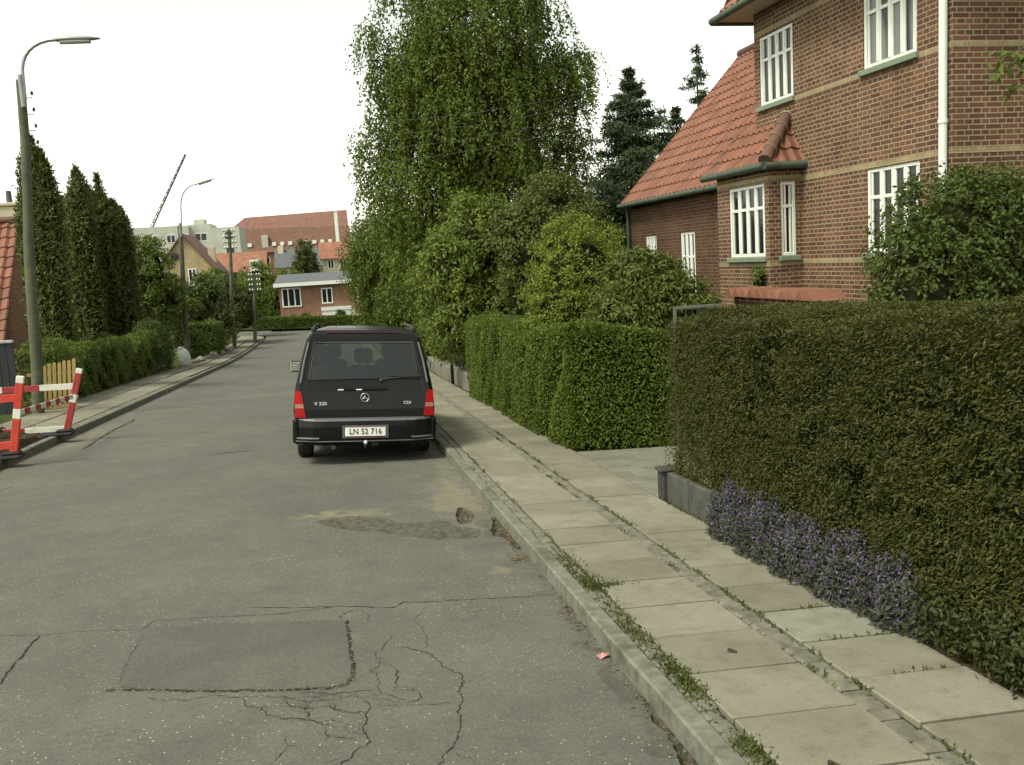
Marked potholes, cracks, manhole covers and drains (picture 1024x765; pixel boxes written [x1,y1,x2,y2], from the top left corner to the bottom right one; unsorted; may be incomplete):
pothole [455,507,474,524]
crack [0,594,549,636]
crack [0,636,40,684]
crack [149,605,472,765]
pothole [490,517,520,550]
